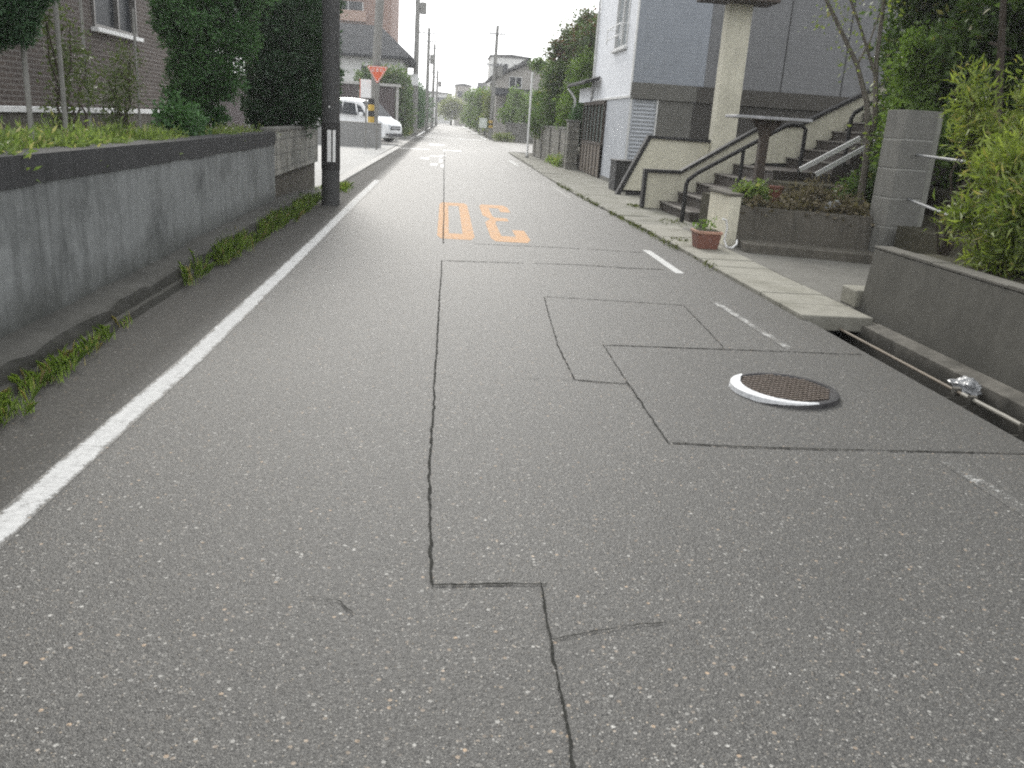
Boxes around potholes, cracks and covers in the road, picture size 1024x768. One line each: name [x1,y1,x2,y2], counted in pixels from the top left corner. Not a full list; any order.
manhole cover [729,372,840,410]
